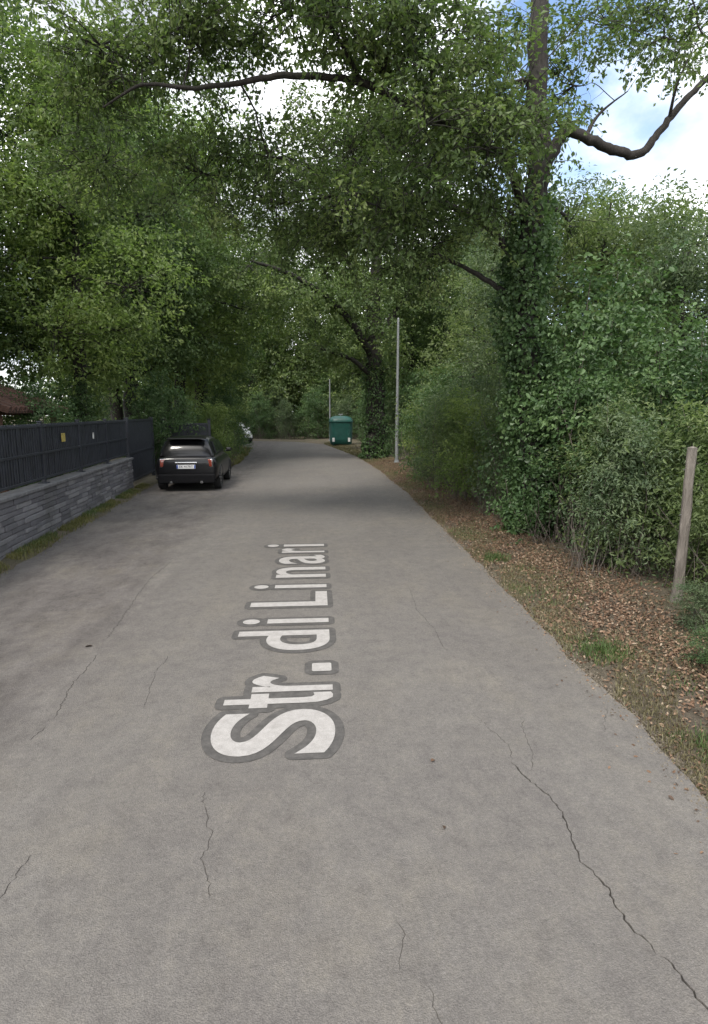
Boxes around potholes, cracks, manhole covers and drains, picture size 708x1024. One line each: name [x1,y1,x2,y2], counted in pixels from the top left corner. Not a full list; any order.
crack [201,792,213,899]
crack [481,719,708,1010]
